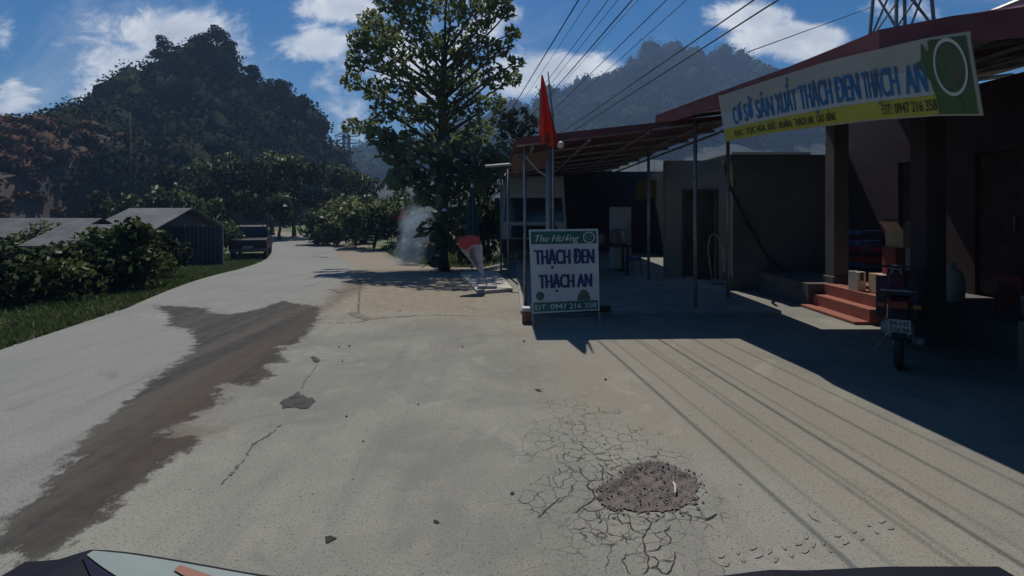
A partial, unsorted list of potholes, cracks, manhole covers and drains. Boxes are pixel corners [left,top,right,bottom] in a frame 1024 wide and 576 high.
crack [538,416,717,574]
pothole [594,460,703,513]
pothole [280,392,316,408]
